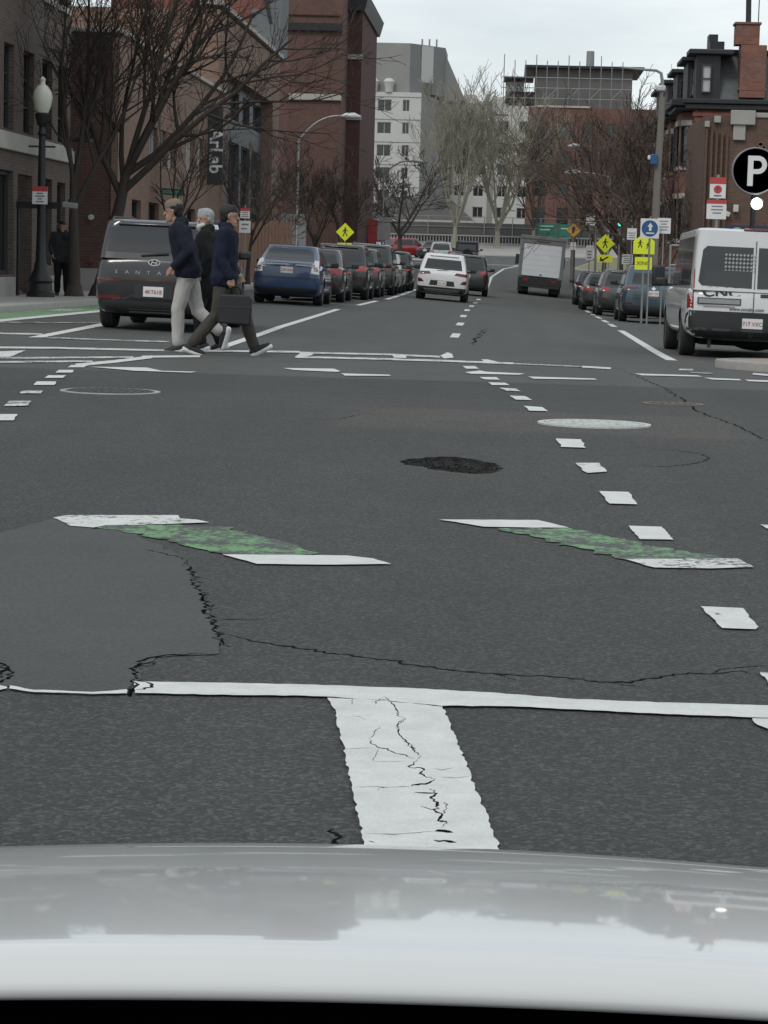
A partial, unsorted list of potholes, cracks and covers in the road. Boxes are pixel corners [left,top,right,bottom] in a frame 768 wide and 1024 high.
manhole cover [642,401,705,413]
pothole [400,457,503,474]
manhole cover [537,419,651,429]
crack [127,655,189,697]
crack [631,374,762,439]
crack [352,702,447,825]
crack [0,664,14,683]
crack [181,558,758,686]
